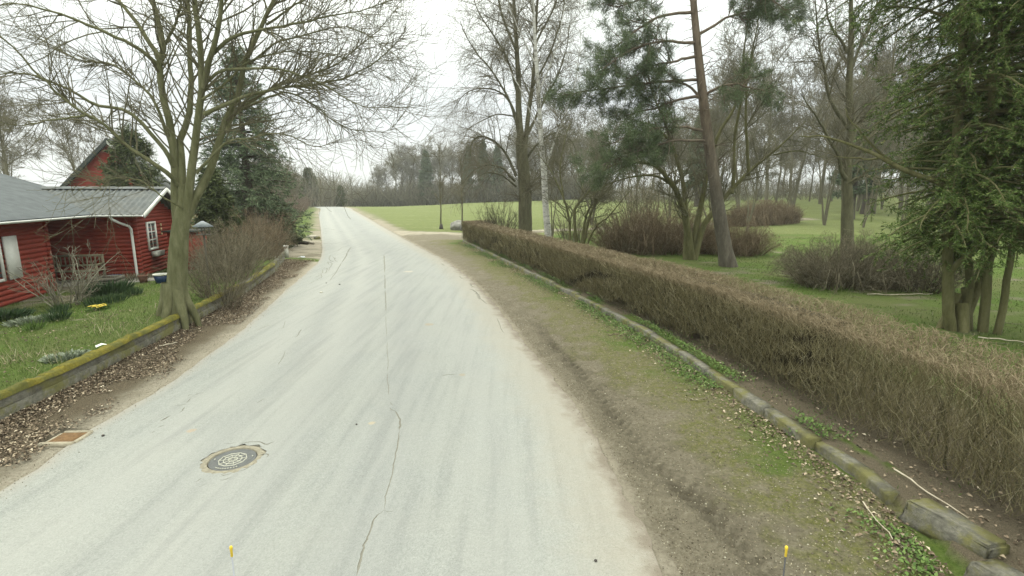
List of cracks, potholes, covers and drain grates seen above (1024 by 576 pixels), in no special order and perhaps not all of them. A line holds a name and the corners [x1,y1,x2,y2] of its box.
crack [357,256,401,573]
crack [311,229,351,283]
manhole cover [200,445,266,480]
drain grate [37,430,93,448]
